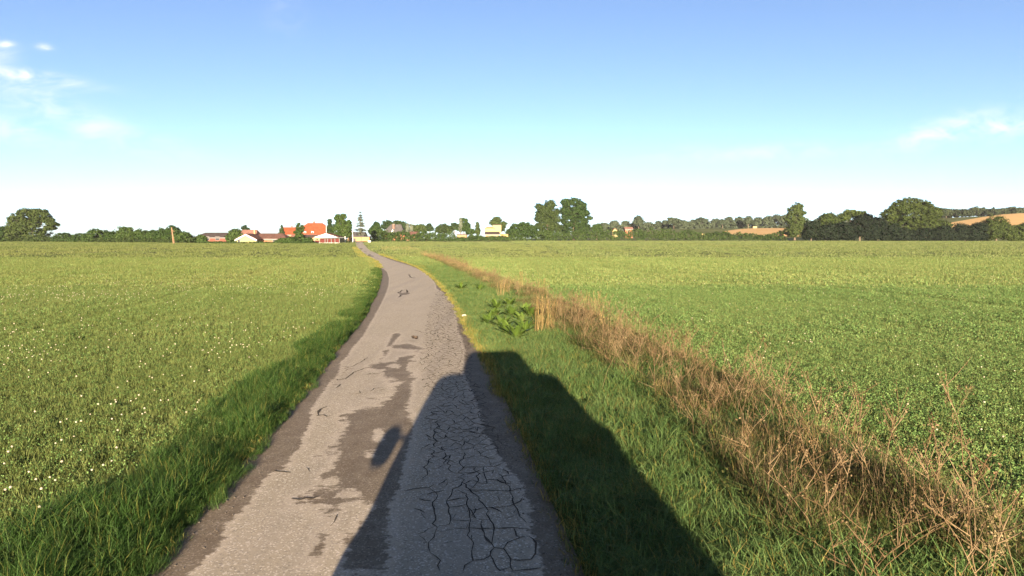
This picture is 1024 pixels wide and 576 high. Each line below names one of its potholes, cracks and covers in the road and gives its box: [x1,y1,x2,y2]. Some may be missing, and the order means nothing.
crack [334,357,383,394]
crack [405,290,541,571]
